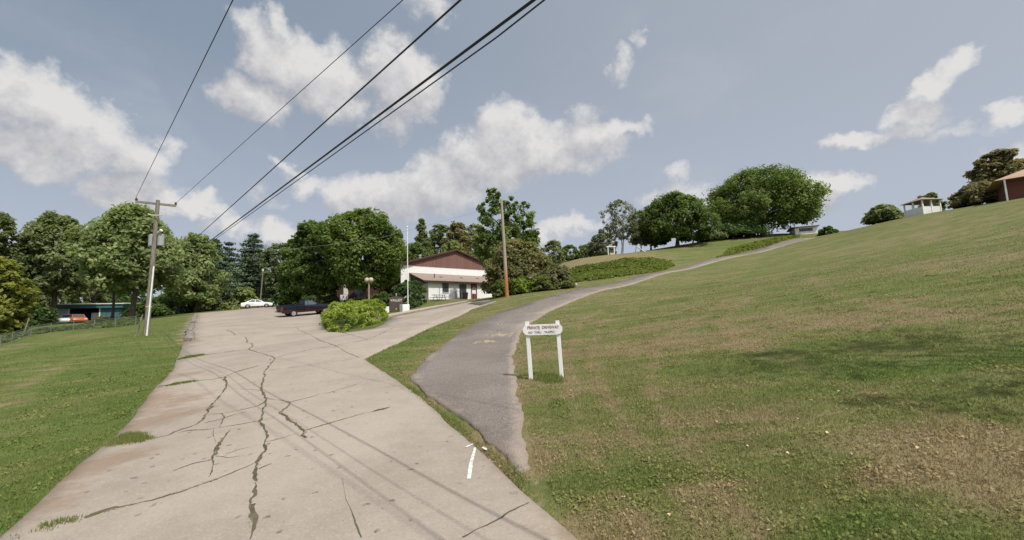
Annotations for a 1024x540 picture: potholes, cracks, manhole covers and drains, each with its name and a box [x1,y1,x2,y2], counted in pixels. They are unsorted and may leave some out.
crack [84,329,390,539]
